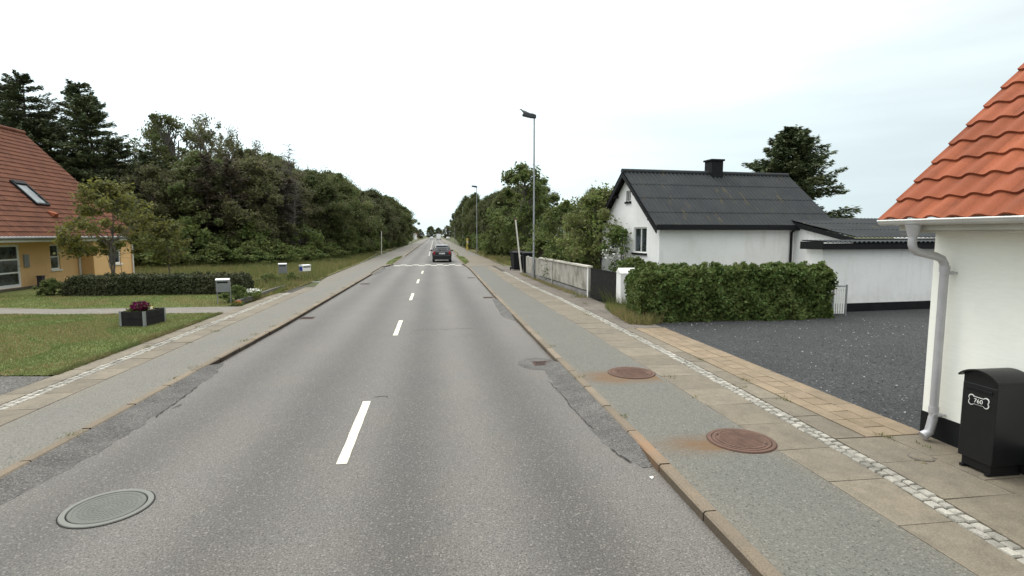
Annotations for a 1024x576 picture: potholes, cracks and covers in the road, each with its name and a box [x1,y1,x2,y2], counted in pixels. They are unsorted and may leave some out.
manhole cover [706,428,778,454]
manhole cover [56,489,156,529]
manhole cover [607,367,656,379]
